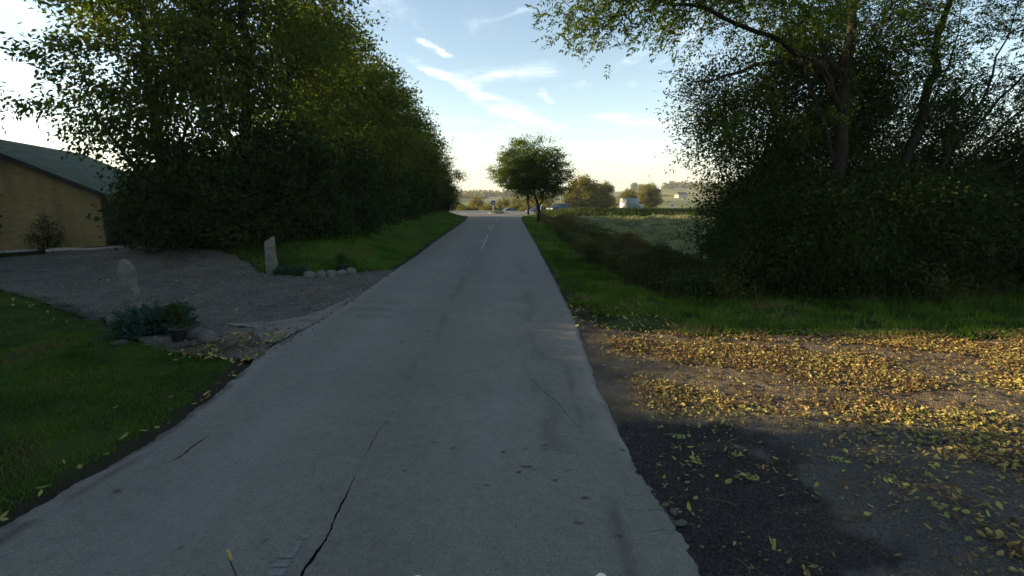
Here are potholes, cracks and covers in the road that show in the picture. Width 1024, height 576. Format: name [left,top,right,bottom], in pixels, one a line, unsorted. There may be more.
crack [300,428,381,576]
